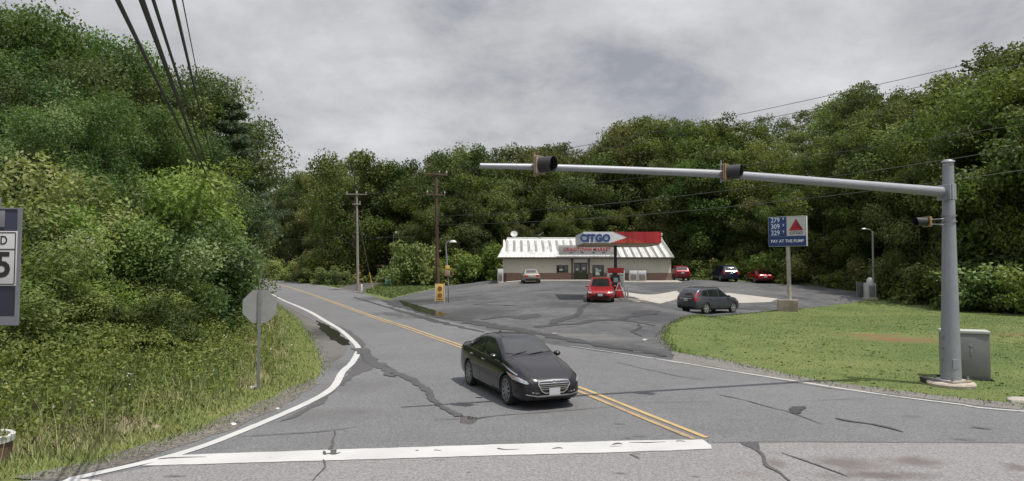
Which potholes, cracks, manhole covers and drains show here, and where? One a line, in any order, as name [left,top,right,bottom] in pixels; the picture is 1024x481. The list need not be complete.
crack [755,449,849,481]
crack [720,394,822,424]
crack [246,426,355,481]
